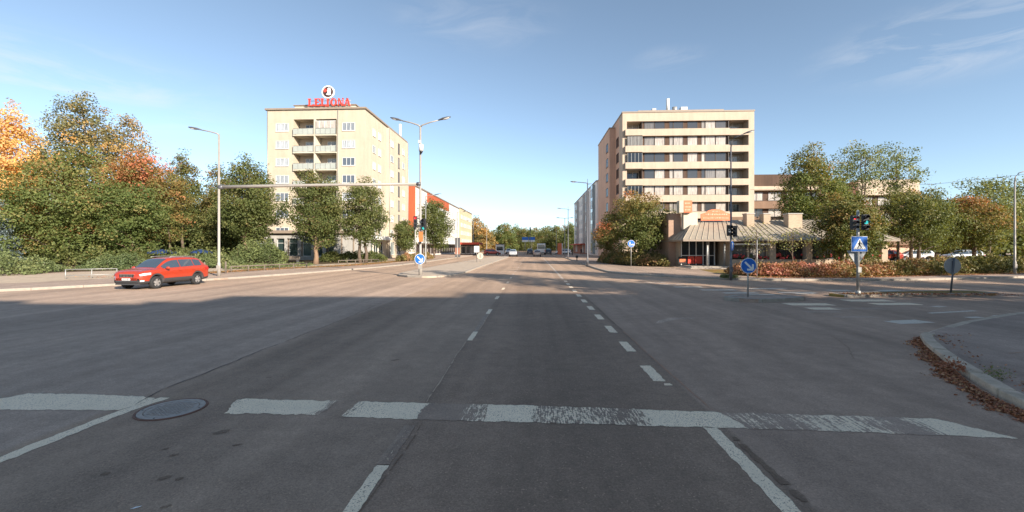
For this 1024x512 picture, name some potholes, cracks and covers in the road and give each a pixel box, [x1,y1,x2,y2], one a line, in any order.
manhole cover [132,398,209,421]
